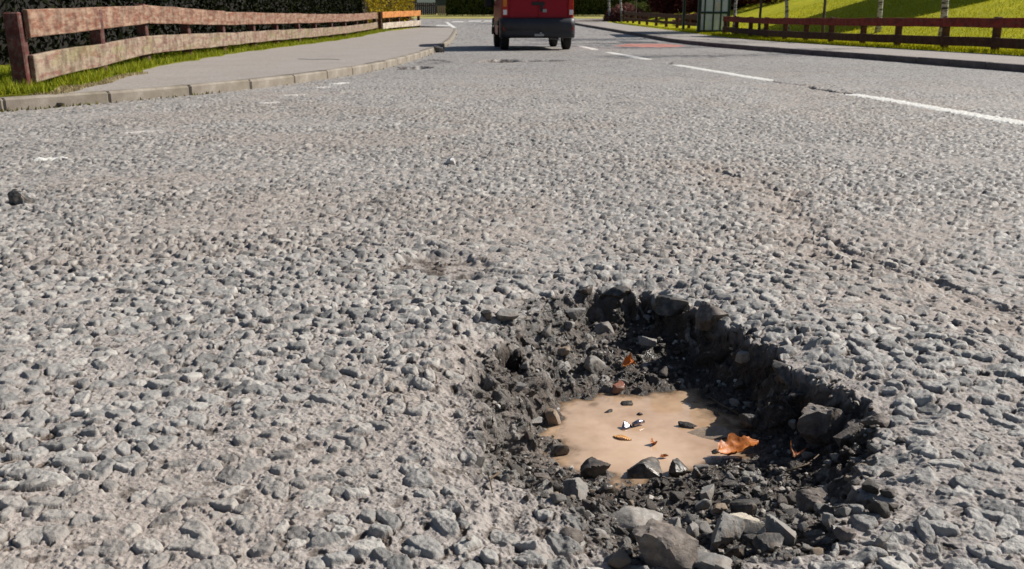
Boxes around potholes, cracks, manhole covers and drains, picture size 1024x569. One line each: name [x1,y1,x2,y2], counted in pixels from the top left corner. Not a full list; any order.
crack [772,81,852,95]
pothole [454,289,905,569]
